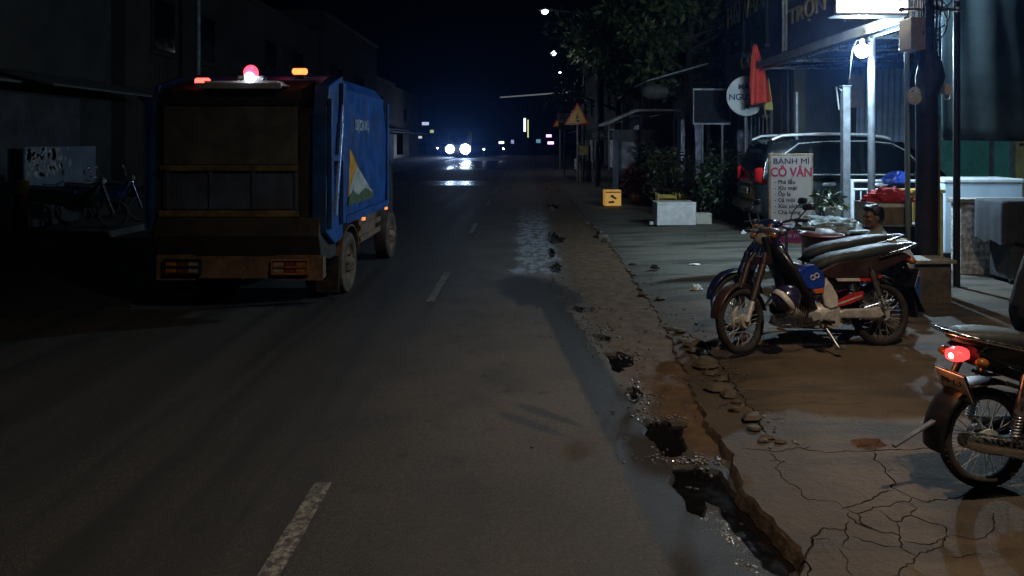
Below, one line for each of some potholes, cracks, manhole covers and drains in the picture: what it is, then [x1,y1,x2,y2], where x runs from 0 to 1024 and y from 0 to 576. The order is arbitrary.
pothole [547,231,566,244]
crack [675,330,995,576]
pothole [667,465,795,576]
pothole [624,386,644,404]
pothole [640,419,688,457]
pothole [602,352,634,373]
